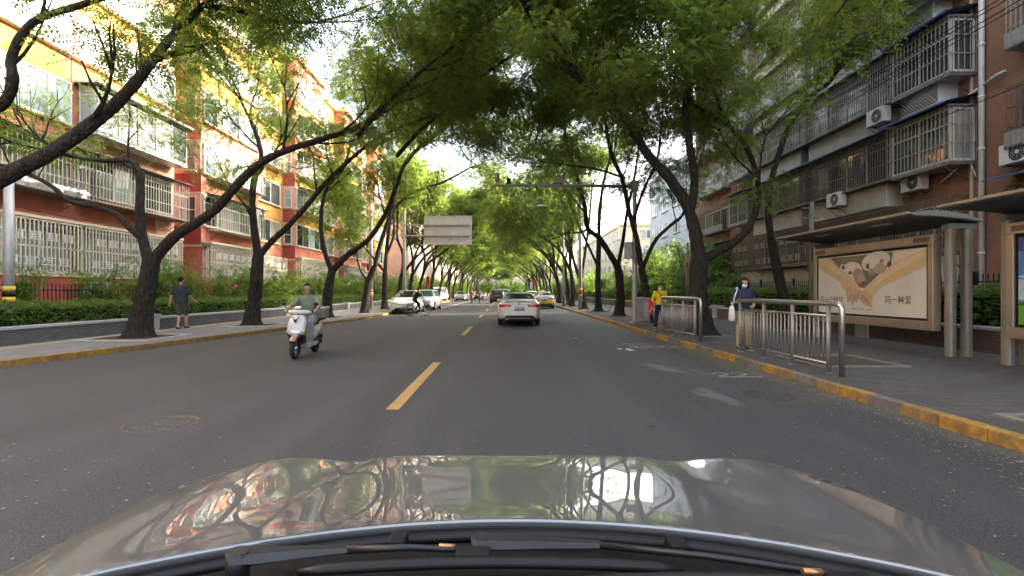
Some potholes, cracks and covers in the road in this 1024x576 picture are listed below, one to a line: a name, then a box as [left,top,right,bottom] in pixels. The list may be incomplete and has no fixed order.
manhole cover [120,415,201,433]
manhole cover [741,391,799,401]
